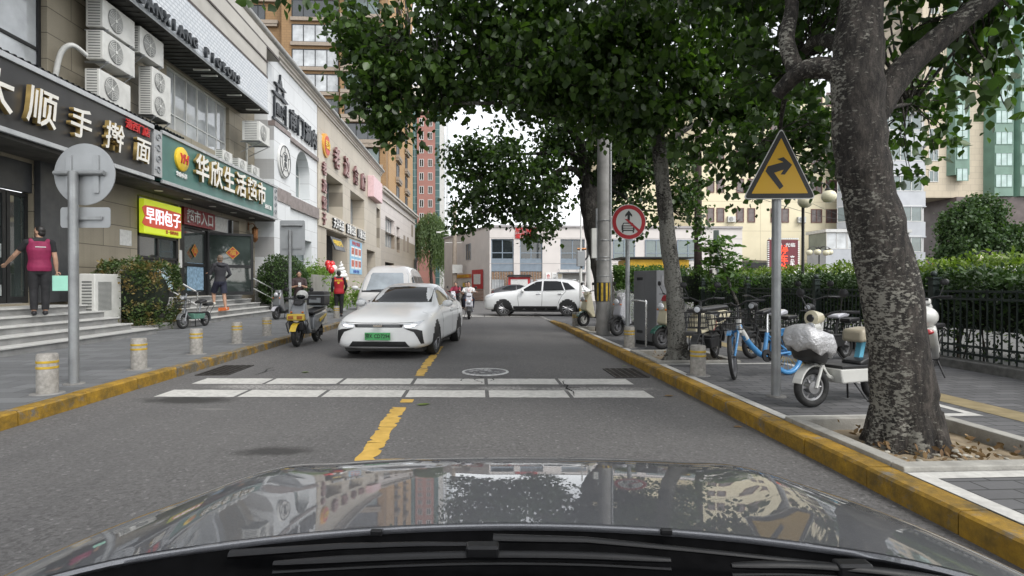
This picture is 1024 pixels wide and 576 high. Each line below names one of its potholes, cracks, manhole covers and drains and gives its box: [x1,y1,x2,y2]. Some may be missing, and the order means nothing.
drain grate [195,365,254,376]
manhole cover [462,368,509,376]
drain grate [603,368,650,378]
